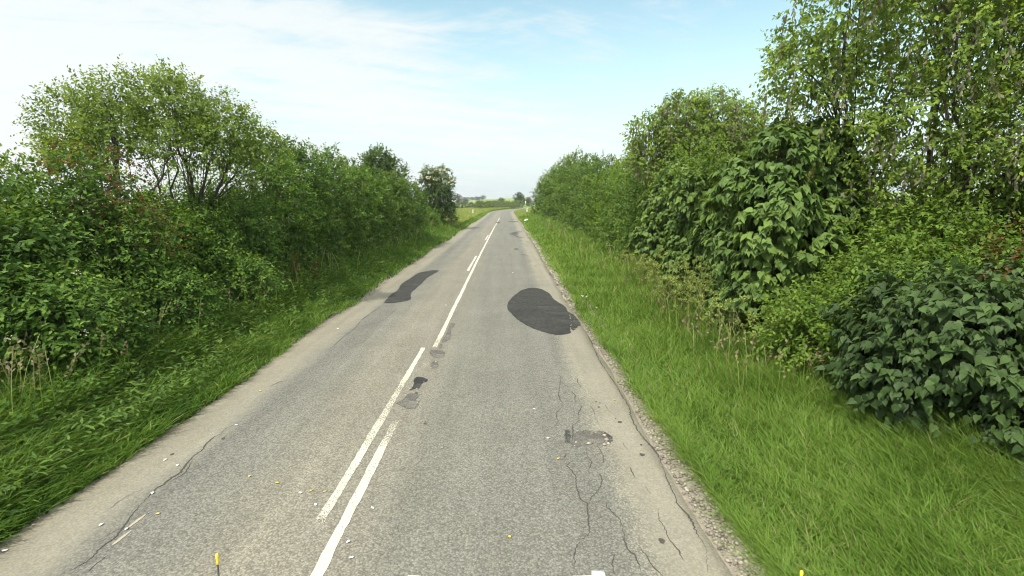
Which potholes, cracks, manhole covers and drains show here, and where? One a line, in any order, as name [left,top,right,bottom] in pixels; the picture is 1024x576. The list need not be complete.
crack [555,328,708,576]
pothole [572,430,610,446]
crack [67,421,241,572]
pothole [409,376,430,390]
